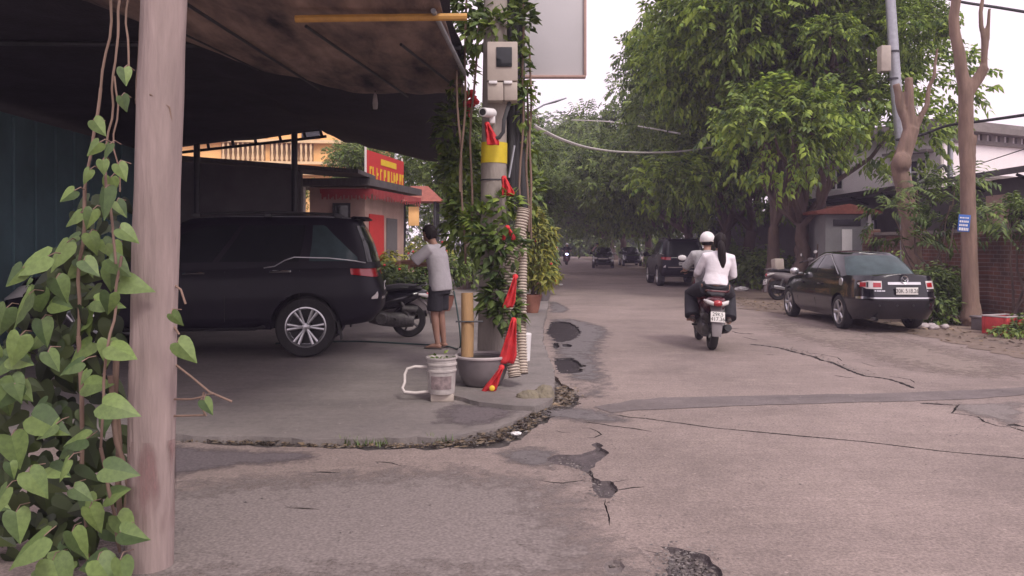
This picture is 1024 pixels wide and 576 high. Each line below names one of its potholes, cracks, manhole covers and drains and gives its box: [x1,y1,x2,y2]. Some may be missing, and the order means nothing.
pothole [660,546,723,576]
pothole [547,442,618,498]
pothole [546,321,582,342]
crack [604,479,640,526]
crack [732,323,1024,431]
pothole [554,358,585,374]
